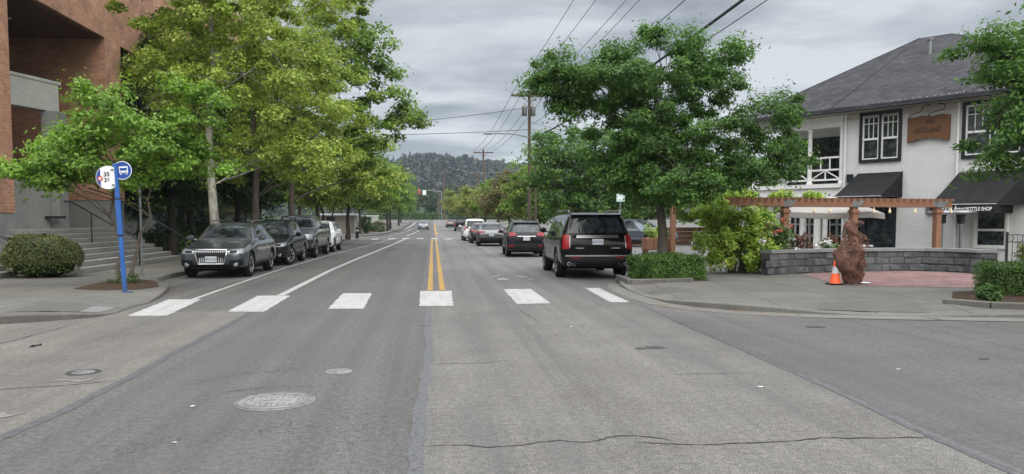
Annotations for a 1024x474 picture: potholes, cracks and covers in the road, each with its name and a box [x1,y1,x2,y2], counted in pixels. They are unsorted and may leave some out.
crack [424,435,935,447]
manhole cover [233,392,316,411]
